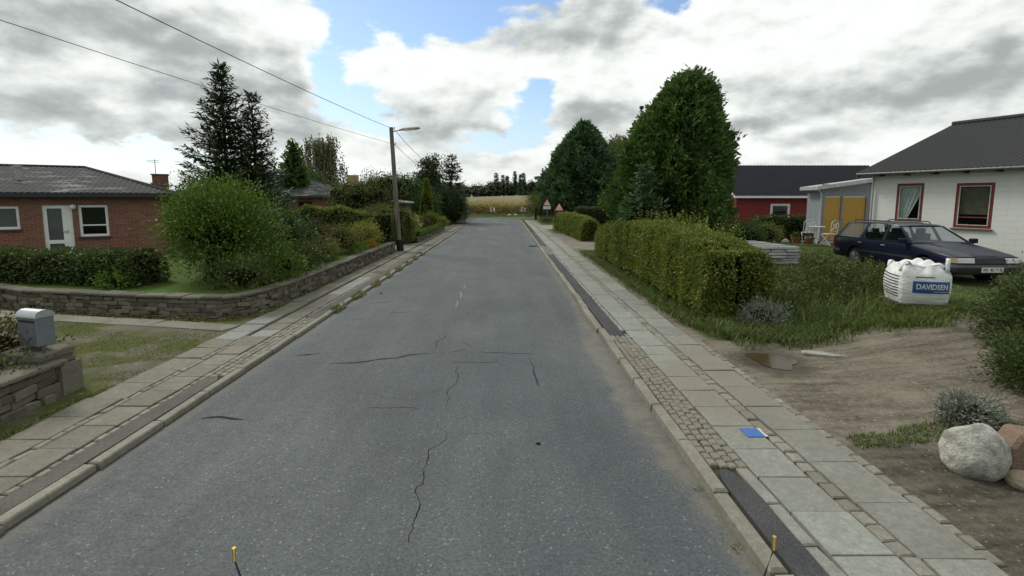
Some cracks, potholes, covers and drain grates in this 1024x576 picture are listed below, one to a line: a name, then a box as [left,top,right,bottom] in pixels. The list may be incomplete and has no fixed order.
crack [407,335,497,549]
